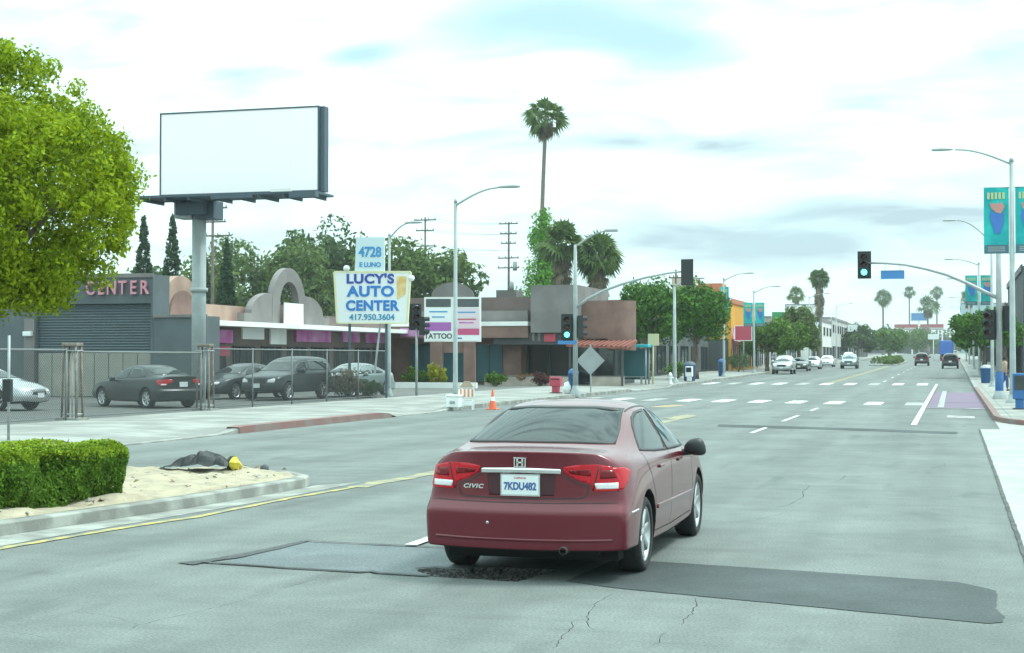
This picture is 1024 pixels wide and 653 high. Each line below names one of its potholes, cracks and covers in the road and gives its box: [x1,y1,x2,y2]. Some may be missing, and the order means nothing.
pothole [417,567,562,582]
